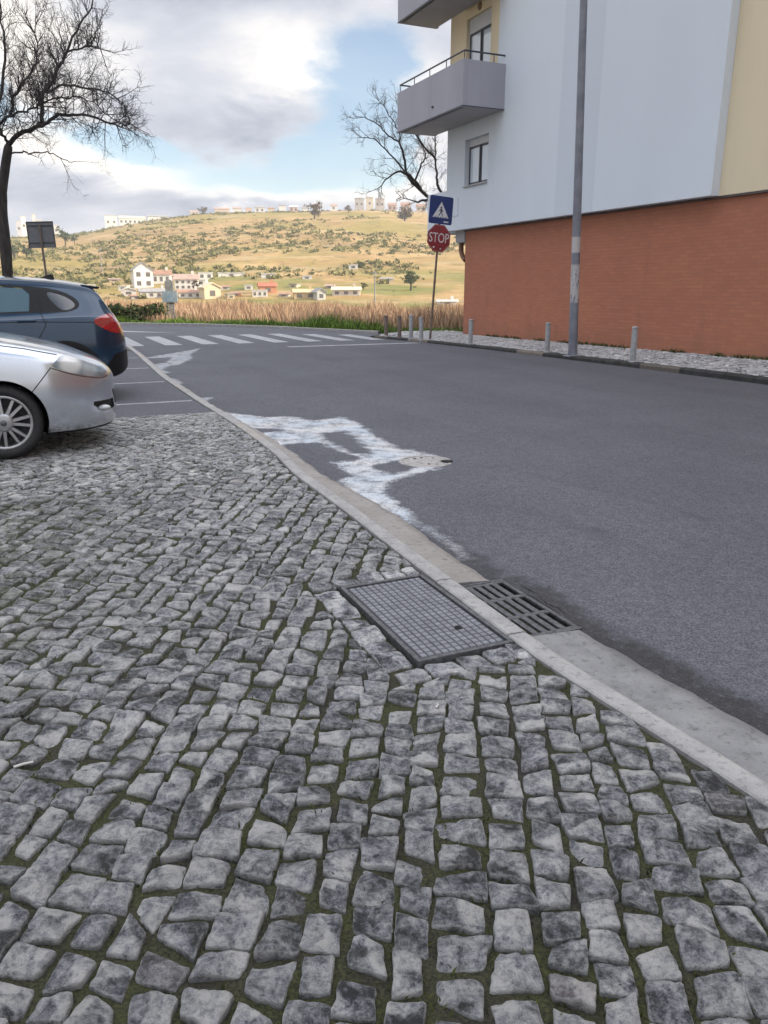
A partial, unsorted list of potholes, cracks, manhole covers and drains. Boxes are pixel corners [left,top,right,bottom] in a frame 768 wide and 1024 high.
drain grate [463,579,582,636]
manhole cover [340,574,515,669]
manhole cover [398,455,452,467]
